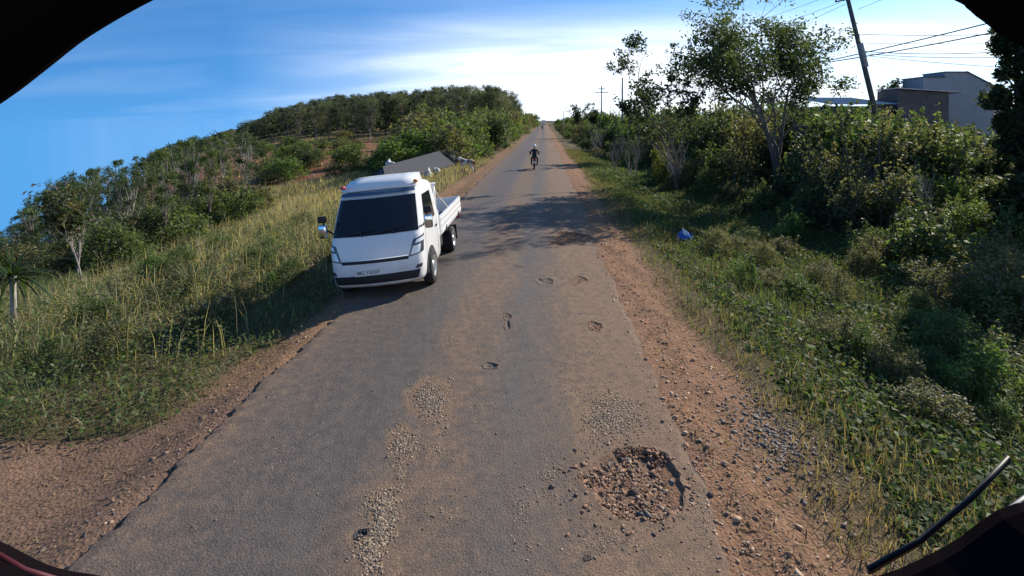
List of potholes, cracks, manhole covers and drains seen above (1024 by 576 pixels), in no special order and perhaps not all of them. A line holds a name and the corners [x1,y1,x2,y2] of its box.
pothole [503,312,513,331]
pothole [588,321,604,332]
pothole [481,361,500,369]
pothole [353,528,371,541]
pothole [572,275,589,285]
pothole [542,430,698,552]
